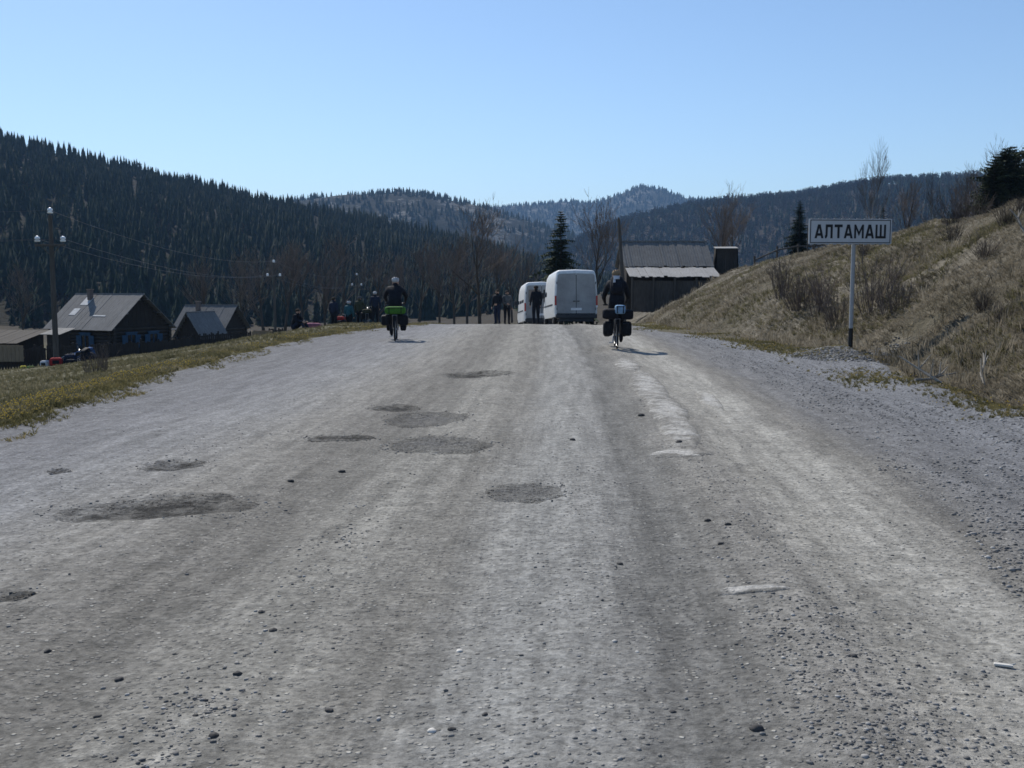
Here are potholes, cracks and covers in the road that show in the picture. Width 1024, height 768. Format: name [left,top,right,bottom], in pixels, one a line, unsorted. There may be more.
pothole [53,493,260,523]
pothole [383,412,468,428]
pothole [389,435,495,454]
pothole [447,370,513,379]
pothole [368,404,421,412]
pothole [485,483,565,504]
pothole [139,460,205,472]
pothole [0,591,36,602]
